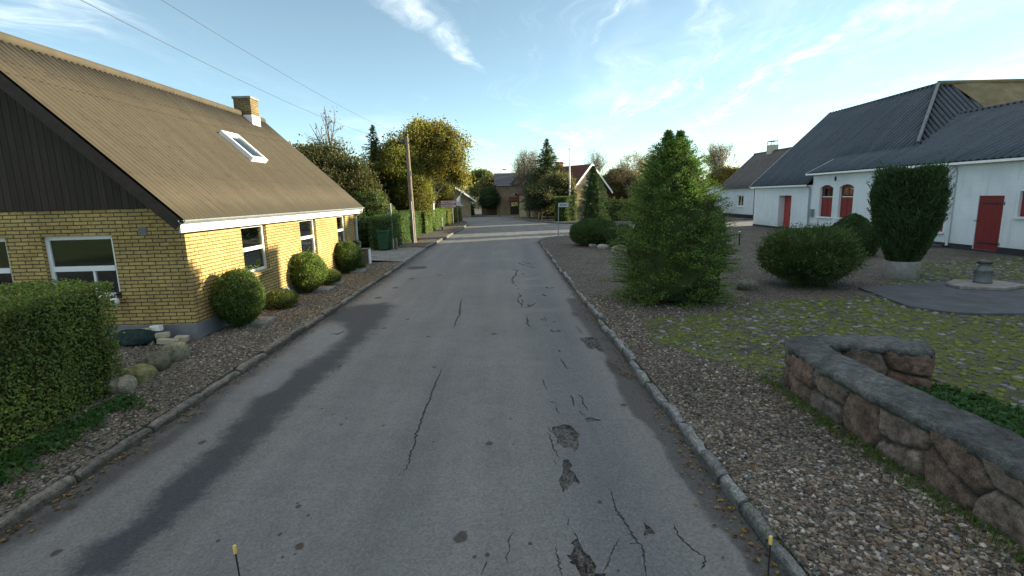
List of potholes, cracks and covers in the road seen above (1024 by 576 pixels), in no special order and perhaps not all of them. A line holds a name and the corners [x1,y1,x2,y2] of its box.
pothole [559,460,580,492]
pothole [581,337,604,352]
crack [511,261,561,332]
crack [398,369,442,476]
pothole [552,424,580,451]
crack [603,492,647,576]
crack [542,350,588,465]
crack [673,524,707,569]
pothole [567,533,606,576]
